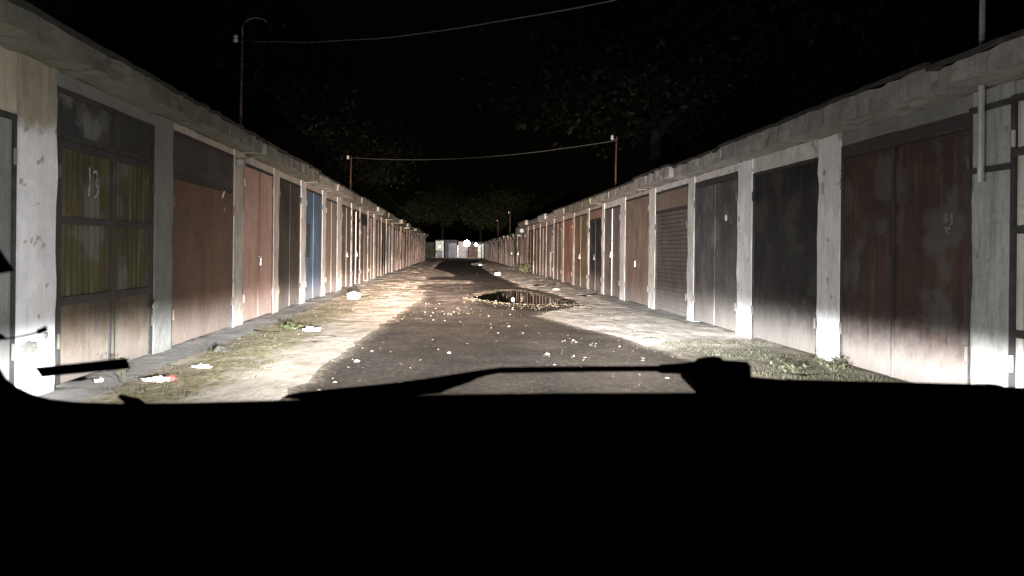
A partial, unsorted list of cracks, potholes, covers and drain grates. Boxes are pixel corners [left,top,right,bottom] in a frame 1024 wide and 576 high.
pothole [472,289,566,304]
